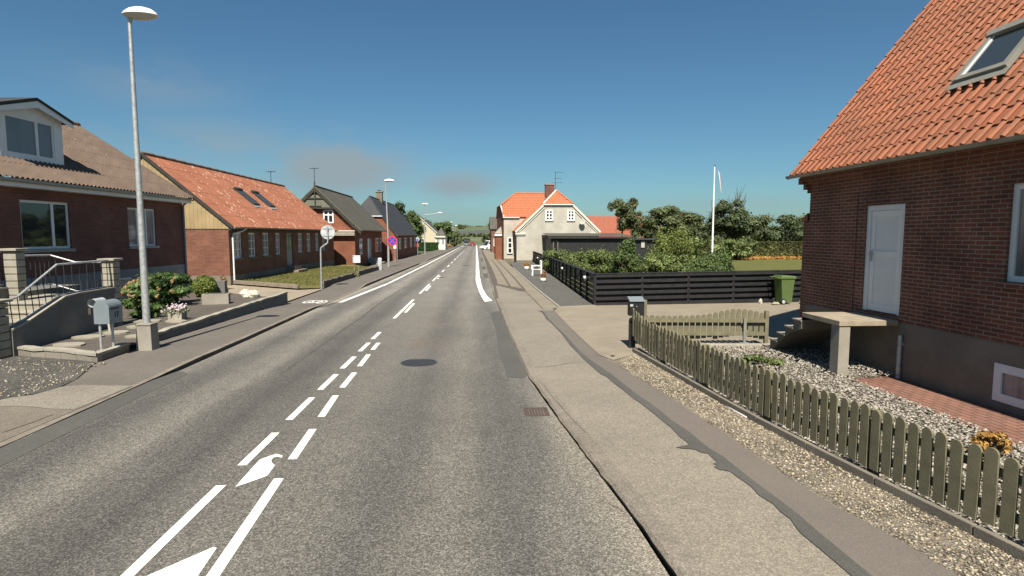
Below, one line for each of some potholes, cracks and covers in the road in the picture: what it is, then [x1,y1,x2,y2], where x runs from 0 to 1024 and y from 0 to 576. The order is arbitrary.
manhole cover [401,359,437,367]
drain grate [523,407,550,416]
